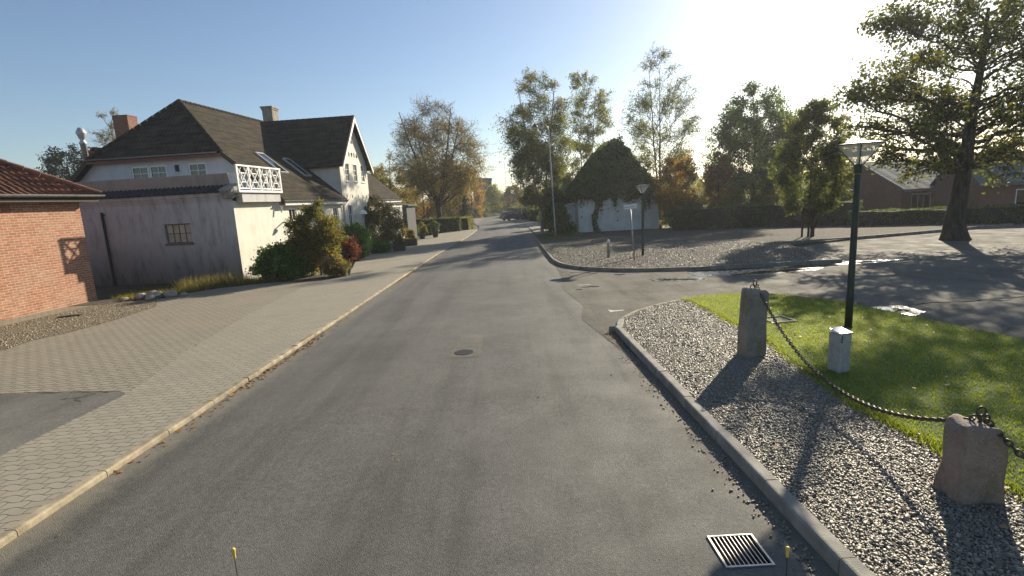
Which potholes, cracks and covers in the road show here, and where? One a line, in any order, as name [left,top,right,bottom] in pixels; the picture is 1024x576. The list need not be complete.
drain grate [706,533,776,569]
